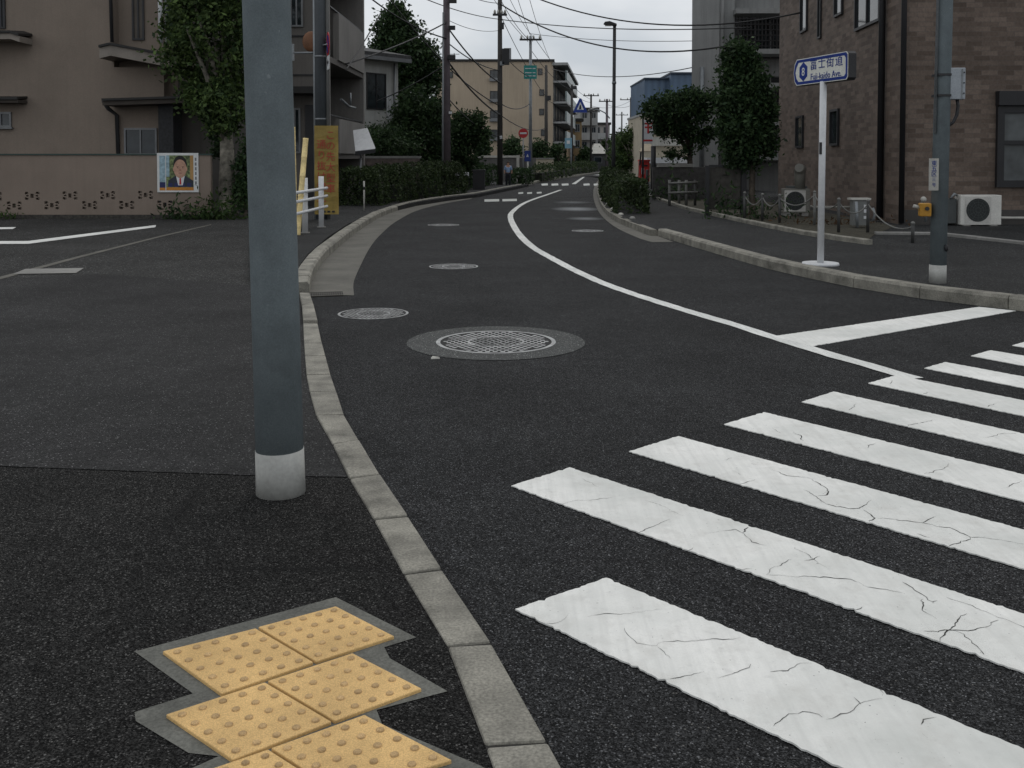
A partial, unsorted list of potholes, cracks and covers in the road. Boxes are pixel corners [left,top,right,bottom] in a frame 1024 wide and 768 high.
crack [903,582,1021,654]
crack [774,689,882,725]
crack [746,548,897,592]
manhole cover [338,308,408,319]
manhole cover [407,326,585,360]
crack [598,609,740,653]
crack [784,474,1021,546]
